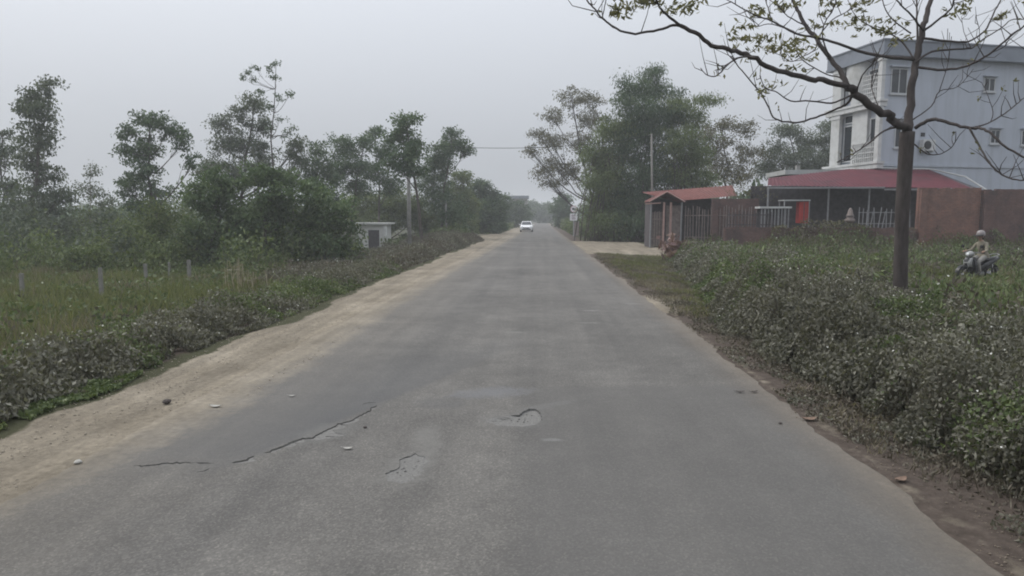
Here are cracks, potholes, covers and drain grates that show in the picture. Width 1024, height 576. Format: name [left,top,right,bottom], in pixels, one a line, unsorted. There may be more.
pothole [385,453,430,483]
crack [137,462,212,472]
pothole [486,409,542,427]
crack [232,402,376,463]
